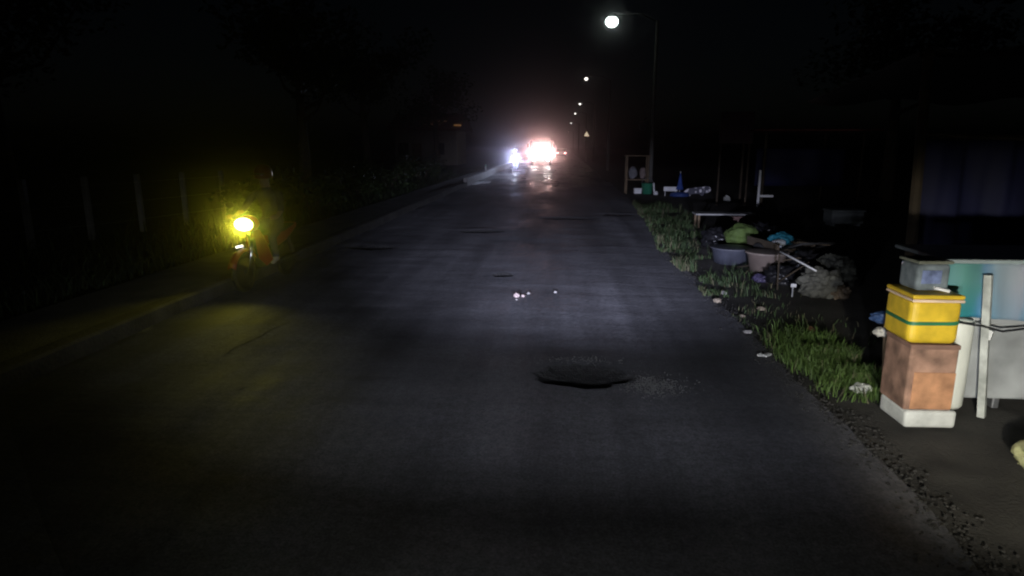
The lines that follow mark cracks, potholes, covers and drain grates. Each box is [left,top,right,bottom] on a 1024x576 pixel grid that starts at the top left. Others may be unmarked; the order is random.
pothole [532,364,638,390]
